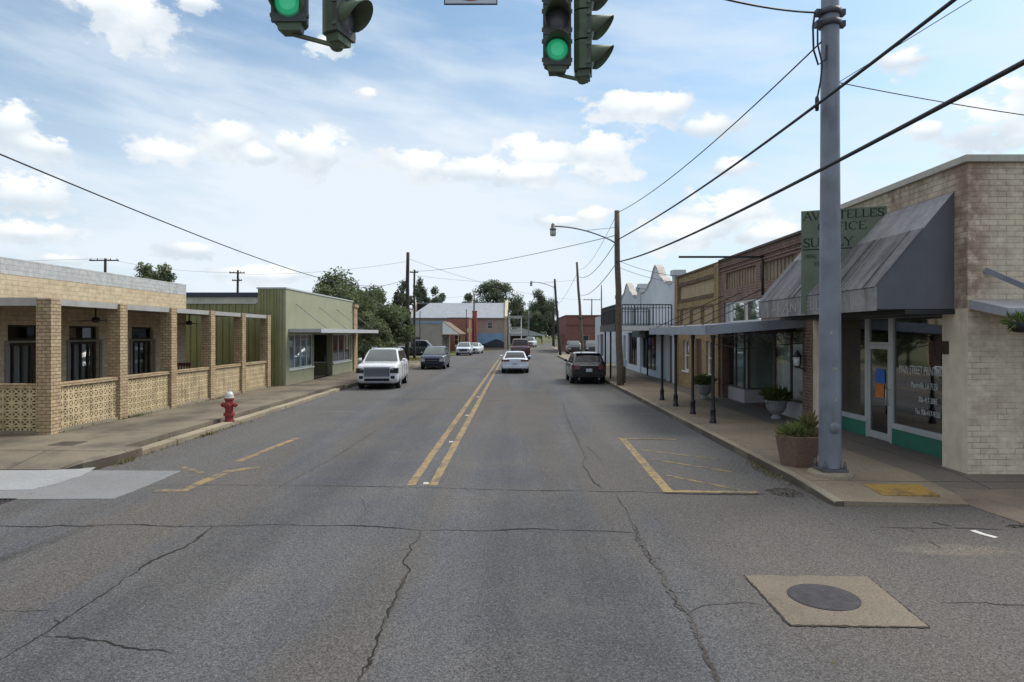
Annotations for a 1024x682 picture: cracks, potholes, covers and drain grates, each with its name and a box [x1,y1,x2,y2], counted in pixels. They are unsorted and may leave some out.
crack [0,402,757,682]
manhole cover [744,575,930,628]
